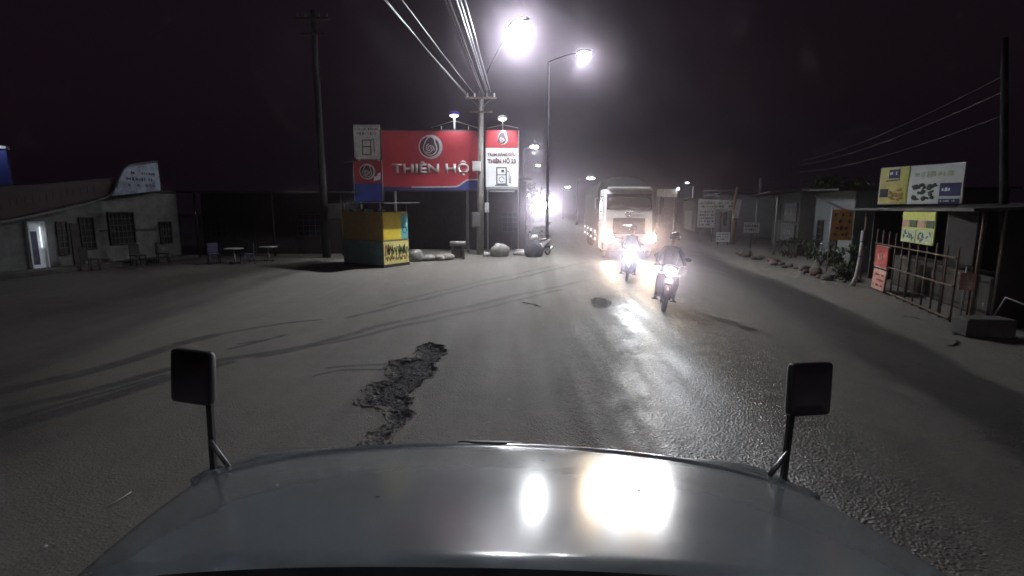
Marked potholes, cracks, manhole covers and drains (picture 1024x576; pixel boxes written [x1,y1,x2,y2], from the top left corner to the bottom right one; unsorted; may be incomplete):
pothole [590,297,612,308]
pothole [352,342,448,446]
